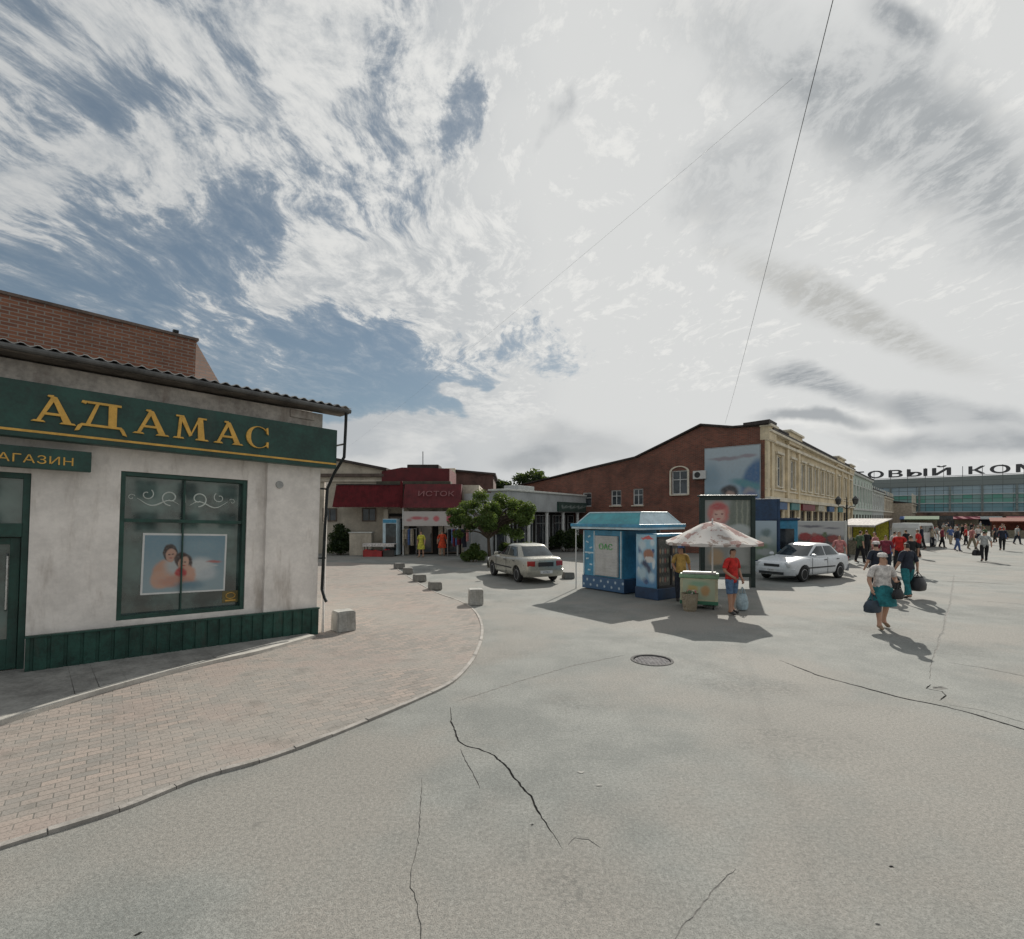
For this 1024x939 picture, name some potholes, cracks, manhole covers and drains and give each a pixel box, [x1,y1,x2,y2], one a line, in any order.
crack [450,707,599,848]
crack [675,870,735,939]
crack [409,779,422,939]
manhole cover [630,654,674,666]
crack [780,660,1024,730]
